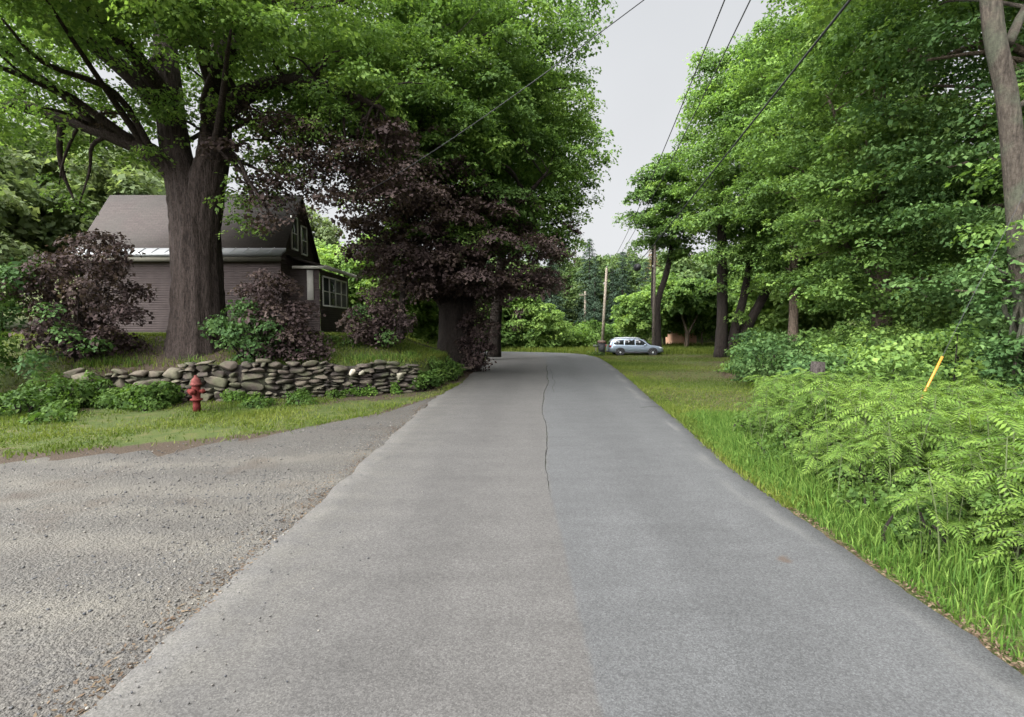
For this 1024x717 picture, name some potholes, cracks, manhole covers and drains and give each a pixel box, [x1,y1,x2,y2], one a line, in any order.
crack [542,367,555,491]
